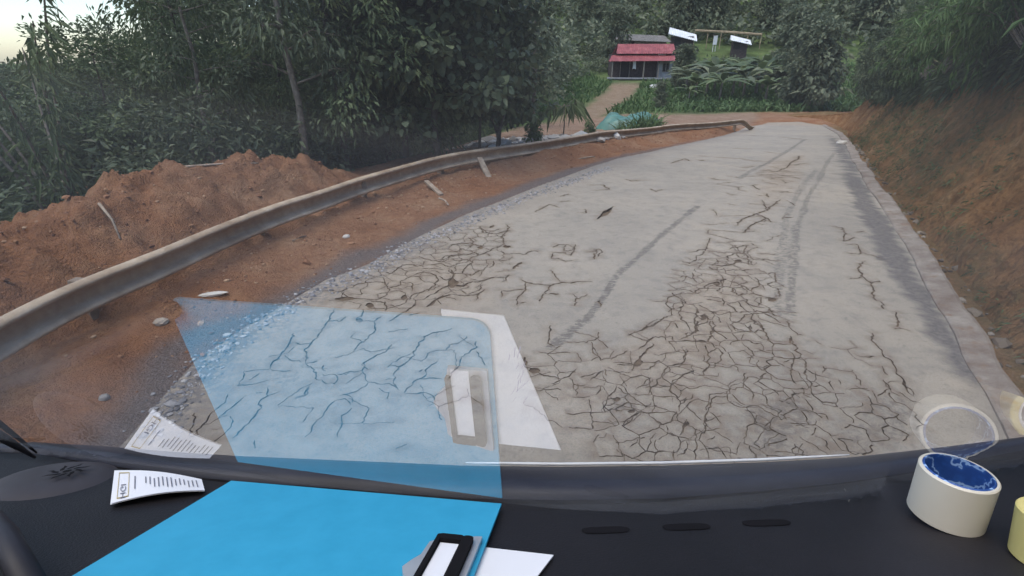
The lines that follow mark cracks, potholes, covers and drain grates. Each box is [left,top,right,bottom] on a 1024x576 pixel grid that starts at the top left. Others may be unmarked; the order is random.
crack [325,225,603,331]
crack [218,309,485,432]
crack [524,137,924,466]
